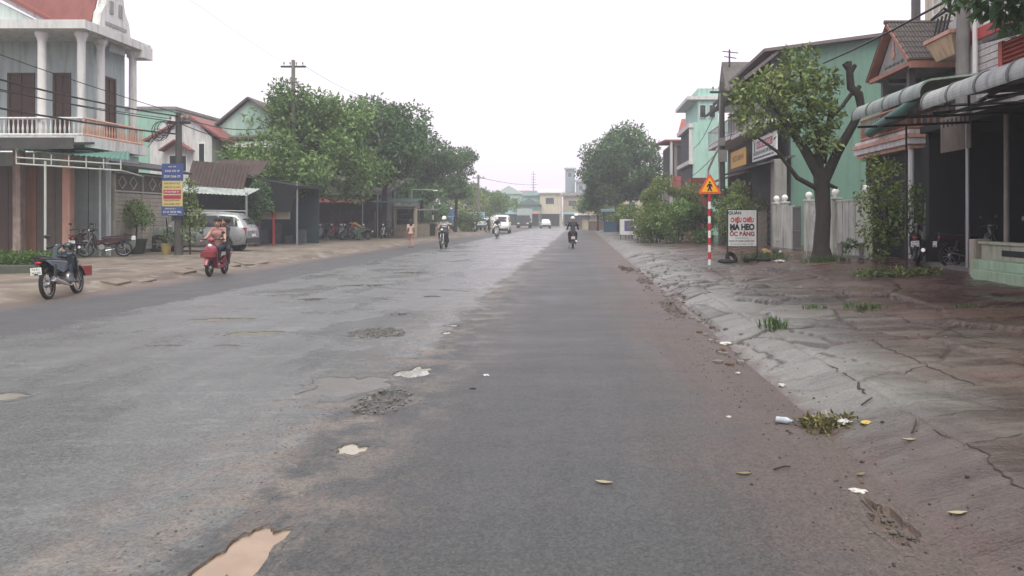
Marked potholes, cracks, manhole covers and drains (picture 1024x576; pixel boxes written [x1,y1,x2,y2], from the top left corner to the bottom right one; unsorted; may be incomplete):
crack [827,364,866,394]
pothole [334,326,417,339]
pothole [855,492,936,560]
pothole [340,387,424,423]
pothole [329,440,378,458]
crack [933,410,1023,488]
pothole [175,514,314,576]
crack [873,340,975,385]
pothole [386,363,440,380]
pothole [273,373,412,402]
